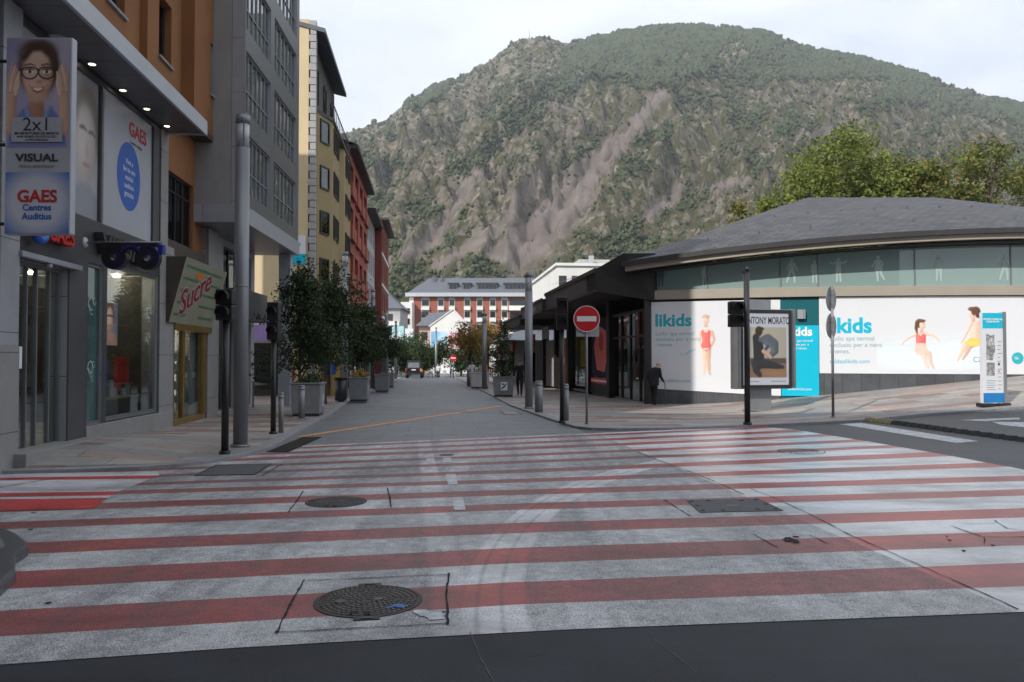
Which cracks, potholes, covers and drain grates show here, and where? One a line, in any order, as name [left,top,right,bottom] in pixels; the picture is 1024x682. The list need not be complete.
manhole cover [195,463,273,476]
drain grate [267,437,322,452]
crack [275,573,450,633]
manhole cover [313,583,422,621]
manhole cover [305,496,367,508]
manhole cover [687,498,784,513]
